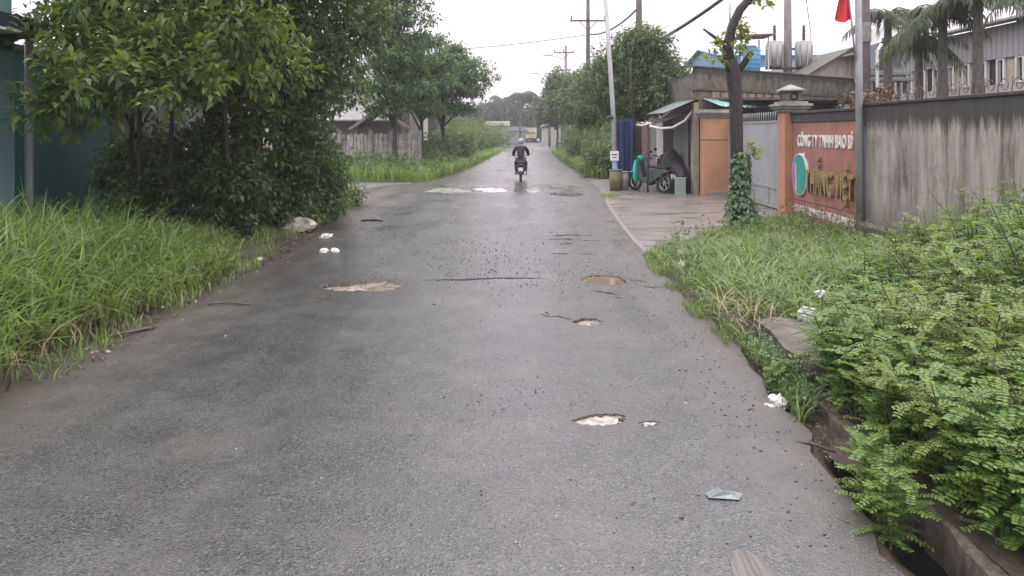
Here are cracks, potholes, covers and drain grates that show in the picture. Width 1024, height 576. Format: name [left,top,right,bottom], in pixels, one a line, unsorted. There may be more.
pothole [581,275,627,285]
pothole [570,413,627,426]
pothole [316,280,410,292]
crack [549,235,621,256]
